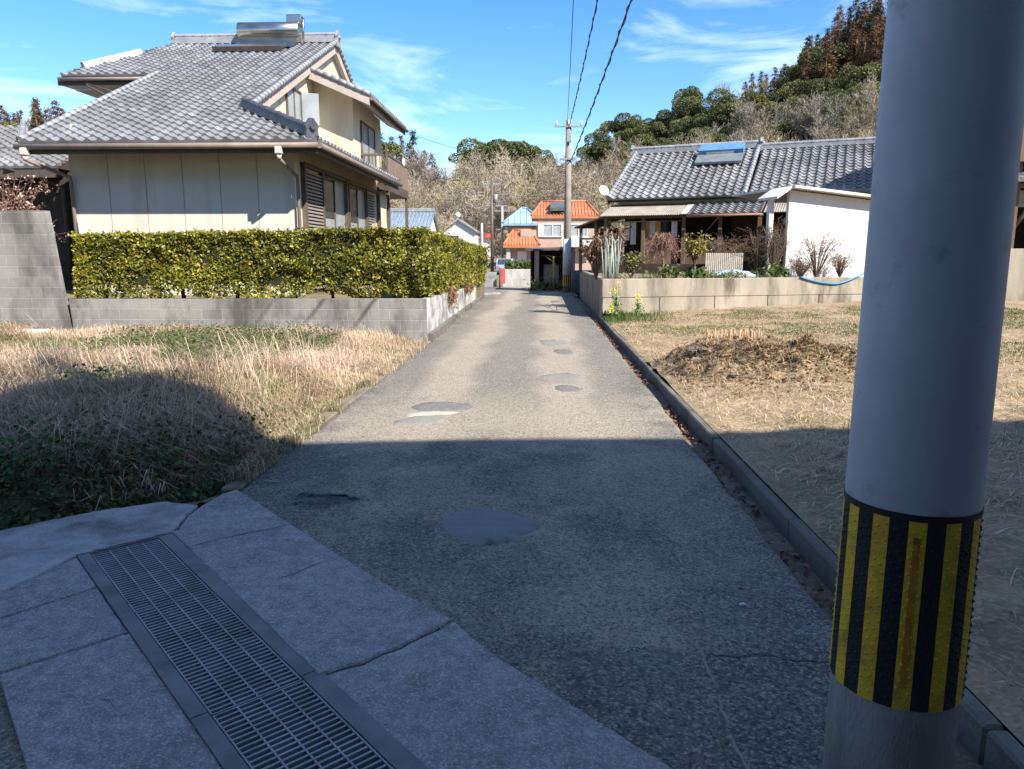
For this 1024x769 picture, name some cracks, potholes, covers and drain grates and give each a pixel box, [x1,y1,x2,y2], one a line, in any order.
pothole [287,492,364,511]
drain grate [135,591,302,717]
crack [686,637,751,769]
drain grate [91,539,211,613]
drain grate [212,680,394,769]
